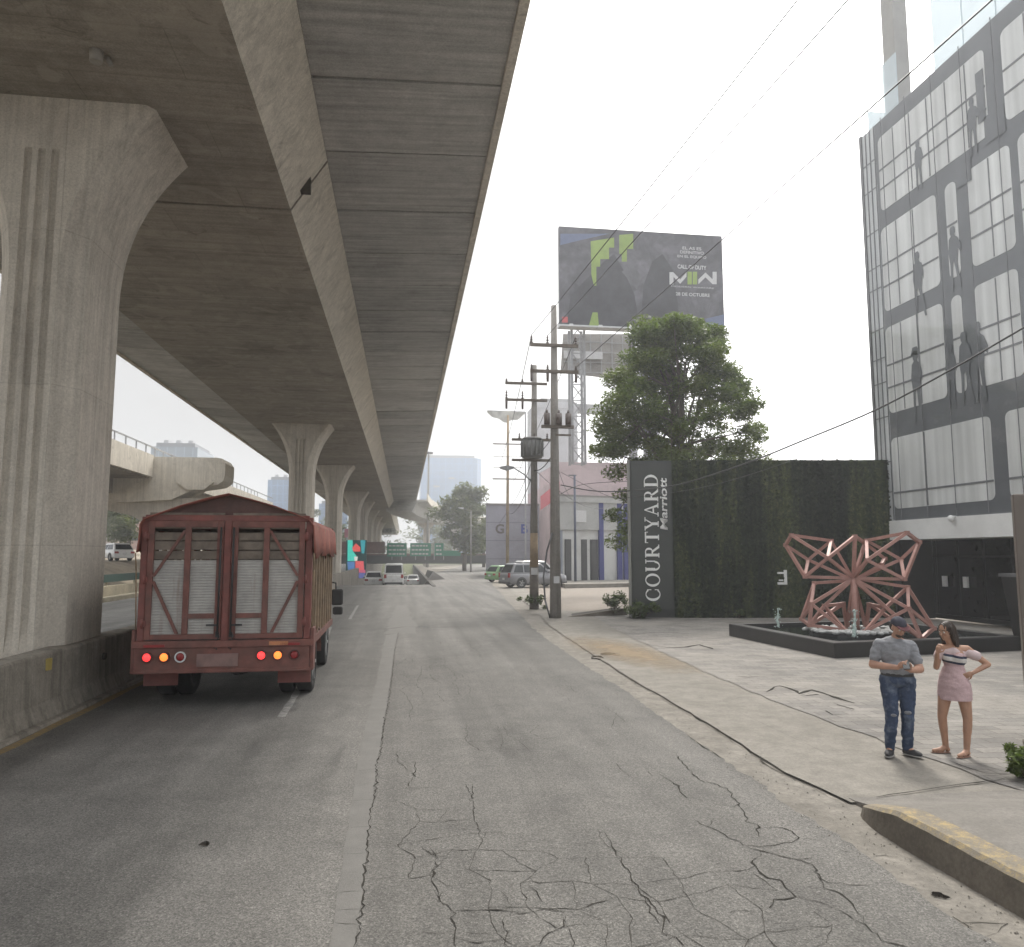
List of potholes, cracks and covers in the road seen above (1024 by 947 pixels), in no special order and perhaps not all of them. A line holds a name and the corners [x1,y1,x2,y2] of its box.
crack [396,617,907,947]
